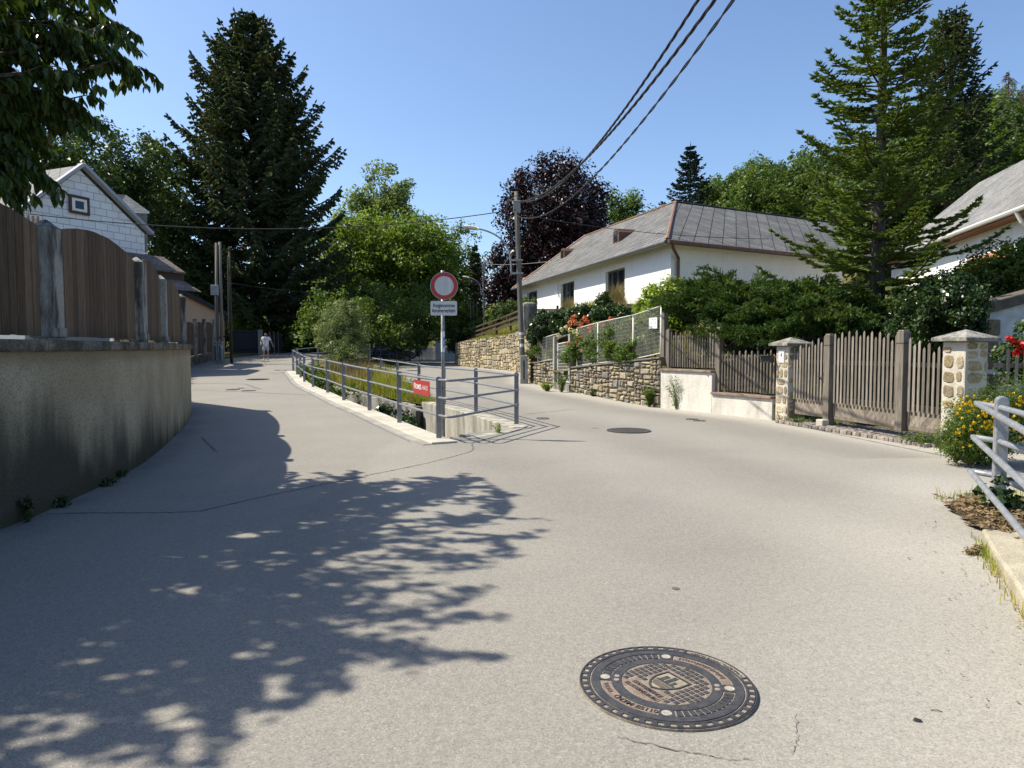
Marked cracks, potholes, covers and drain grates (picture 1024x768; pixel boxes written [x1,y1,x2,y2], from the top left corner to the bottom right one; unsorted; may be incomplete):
manhole cover [579,646,758,732]
crack [616,735,756,760]
